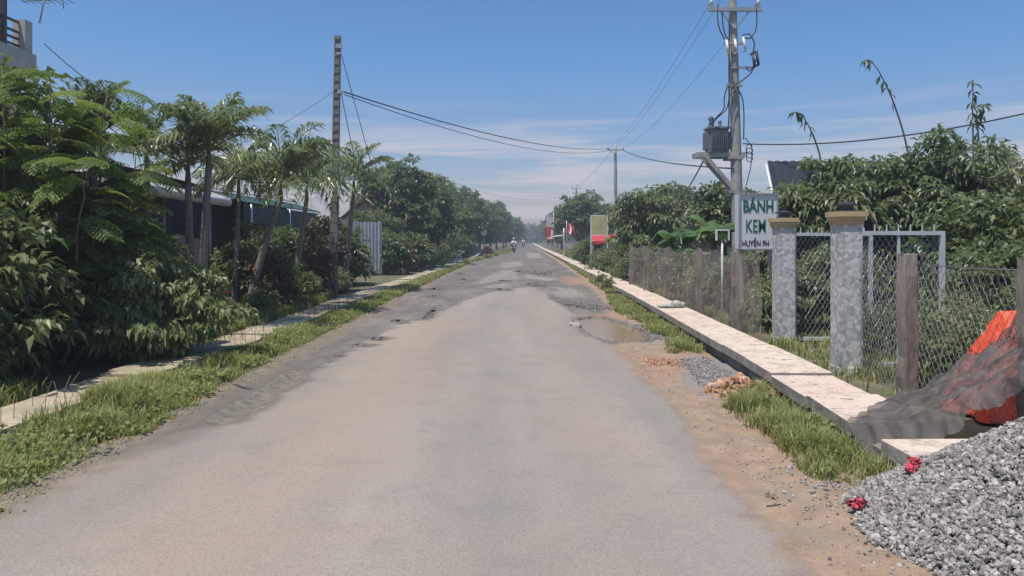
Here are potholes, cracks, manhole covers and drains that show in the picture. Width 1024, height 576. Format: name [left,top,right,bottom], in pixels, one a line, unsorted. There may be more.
pothole [577,317,648,339]
pothole [554,298,595,309]
